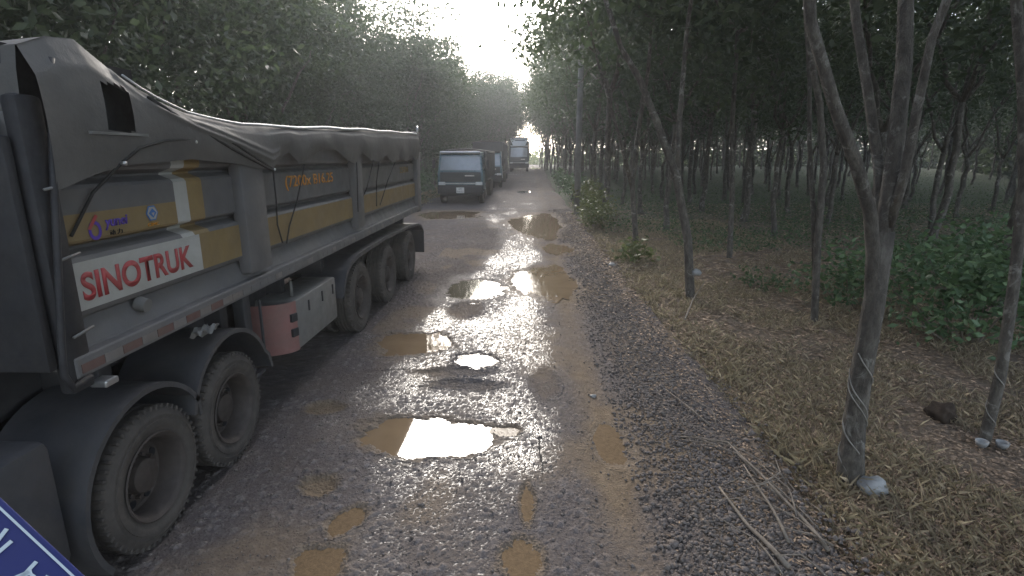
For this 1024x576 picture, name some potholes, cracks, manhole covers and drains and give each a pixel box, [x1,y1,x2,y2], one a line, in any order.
pothole [502,212,571,242]
pothole [433,275,519,306]
pothole [501,264,587,307]
pothole [537,243,586,256]
pothole [444,300,490,320]
pothole [448,350,504,369]
pothole [517,477,538,531]
pothole [364,330,464,358]
pothole [420,377,508,392]
pothole [492,531,549,576]
pothole [291,471,344,500]
pothole [349,411,520,467]
